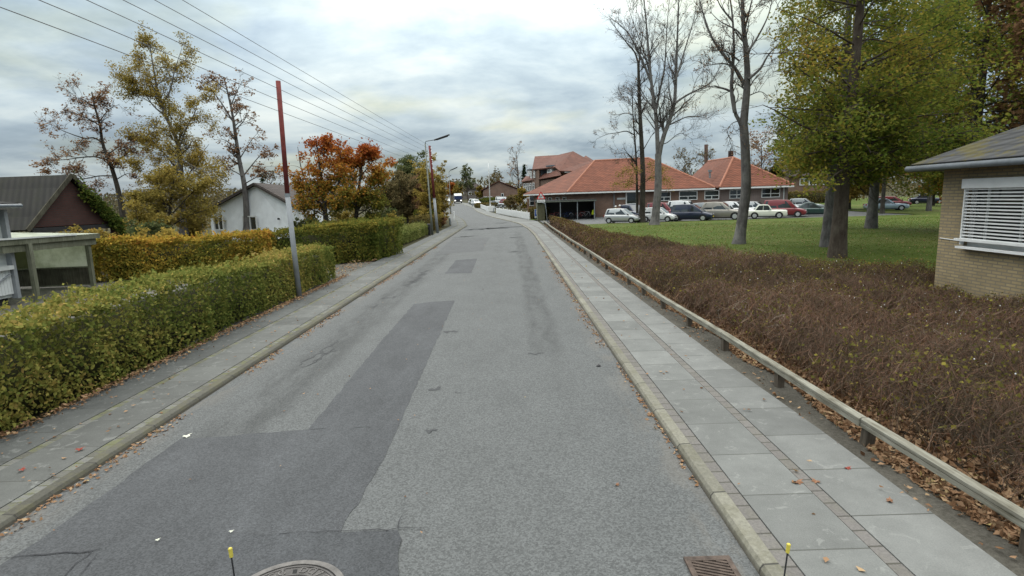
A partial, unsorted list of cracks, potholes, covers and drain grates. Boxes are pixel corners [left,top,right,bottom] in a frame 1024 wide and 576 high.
drain grate [683,555,741,576]
crack [0,548,100,576]
manhole cover [252,560,344,576]
crack [300,340,339,367]
